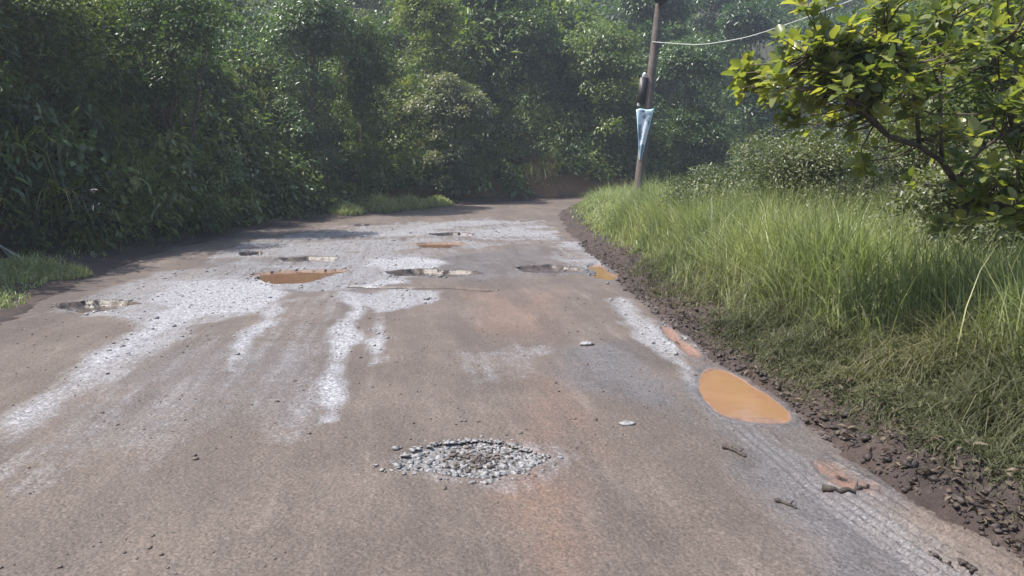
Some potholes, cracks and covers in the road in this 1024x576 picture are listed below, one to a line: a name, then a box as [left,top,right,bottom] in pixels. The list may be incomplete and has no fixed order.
pothole [513,264,596,276]
pothole [373,427,566,503]
pothole [688,365,800,428]
pothole [246,266,354,286]
pothole [658,322,706,362]
pothole [402,240,470,249]
pothole [381,267,488,278]
pothole [276,255,342,263]
pothole [51,299,147,314]
pothole [793,455,898,502]
pothole [579,262,620,284]
